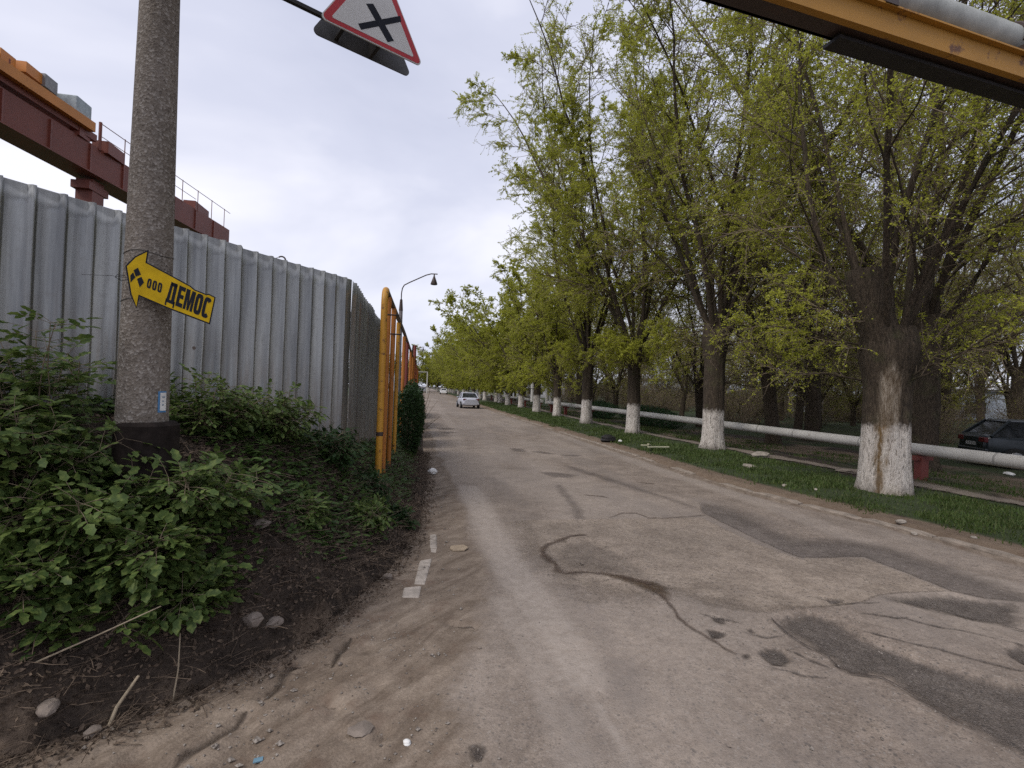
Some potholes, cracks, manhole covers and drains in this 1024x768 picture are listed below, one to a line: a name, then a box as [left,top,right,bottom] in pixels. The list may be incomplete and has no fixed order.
crack [818,594,1024,671]
crack [541,534,966,726]
pothole [760,650,788,665]
pothole [470,745,484,760]
